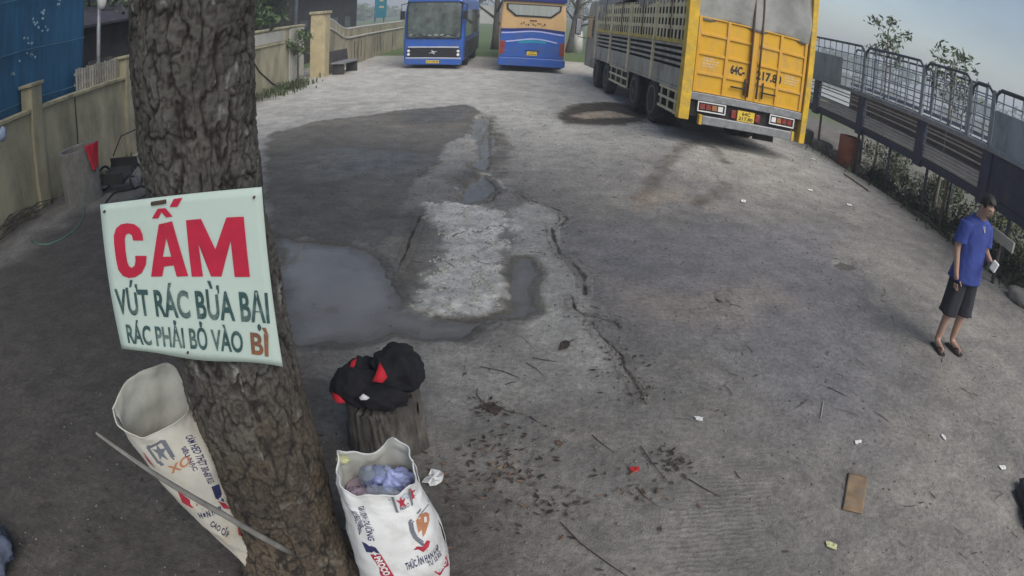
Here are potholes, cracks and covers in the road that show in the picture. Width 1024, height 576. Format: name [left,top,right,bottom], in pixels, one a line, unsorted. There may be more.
crack [446,189,655,407]
pothole [272,231,559,356]
pothole [460,115,505,173]
pothole [549,102,650,125]
crack [385,214,427,280]
